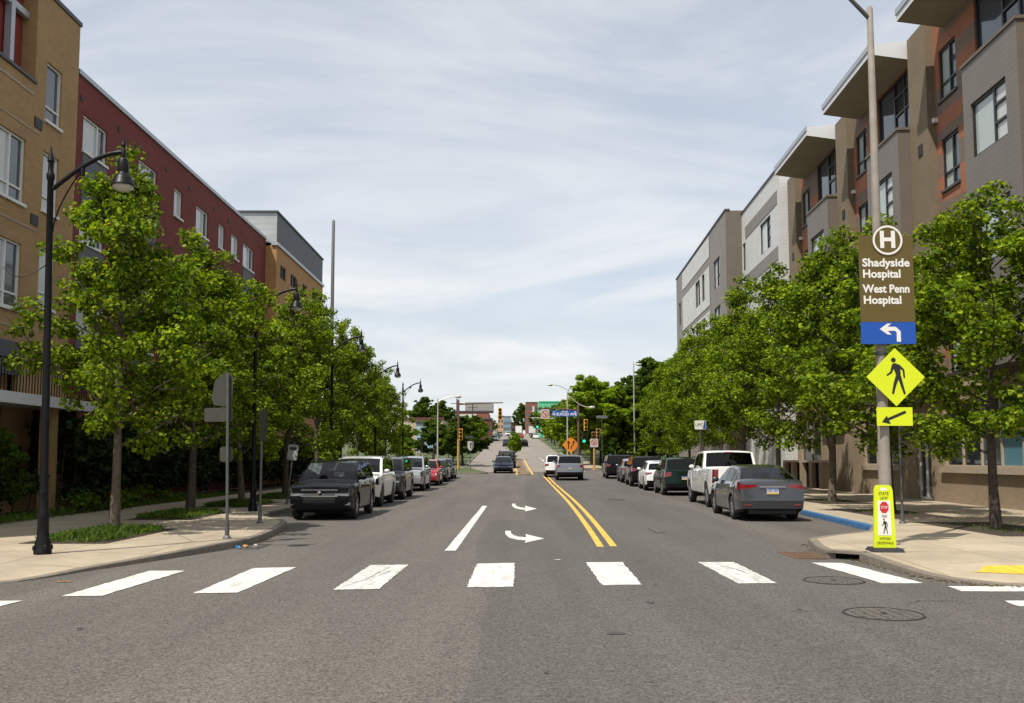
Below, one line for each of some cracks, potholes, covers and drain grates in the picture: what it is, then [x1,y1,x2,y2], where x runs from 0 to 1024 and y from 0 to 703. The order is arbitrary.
manhole cover [841,607,927,621]
drain grate [776,549,867,560]
manhole cover [802,576,866,585]
